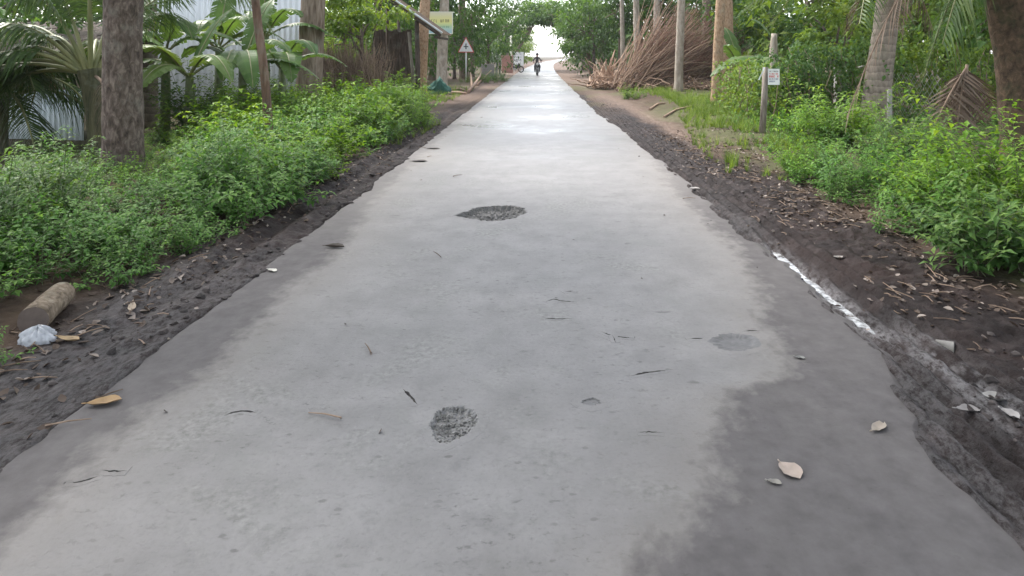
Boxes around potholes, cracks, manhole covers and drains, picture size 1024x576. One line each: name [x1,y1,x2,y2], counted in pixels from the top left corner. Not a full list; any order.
pothole [449,204,533,223]
pothole [417,400,490,451]
